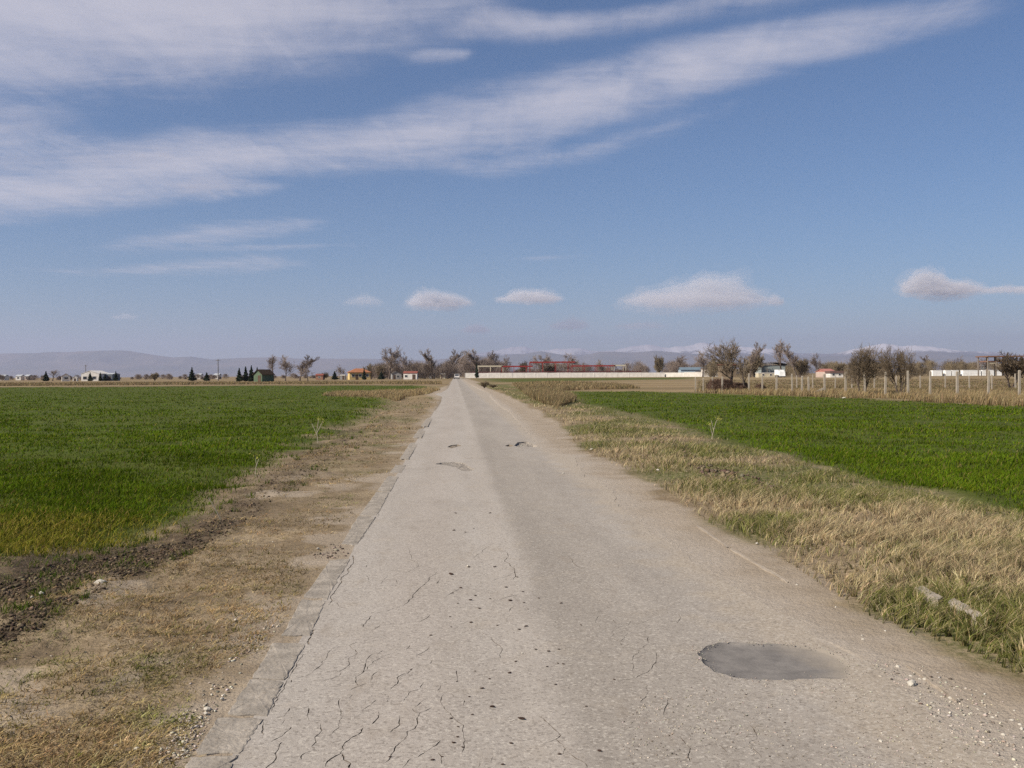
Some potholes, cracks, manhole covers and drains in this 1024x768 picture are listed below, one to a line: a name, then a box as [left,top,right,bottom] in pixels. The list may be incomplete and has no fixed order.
crack [330,550,457,629]
crack [261,630,493,768]
crack [595,617,680,715]
